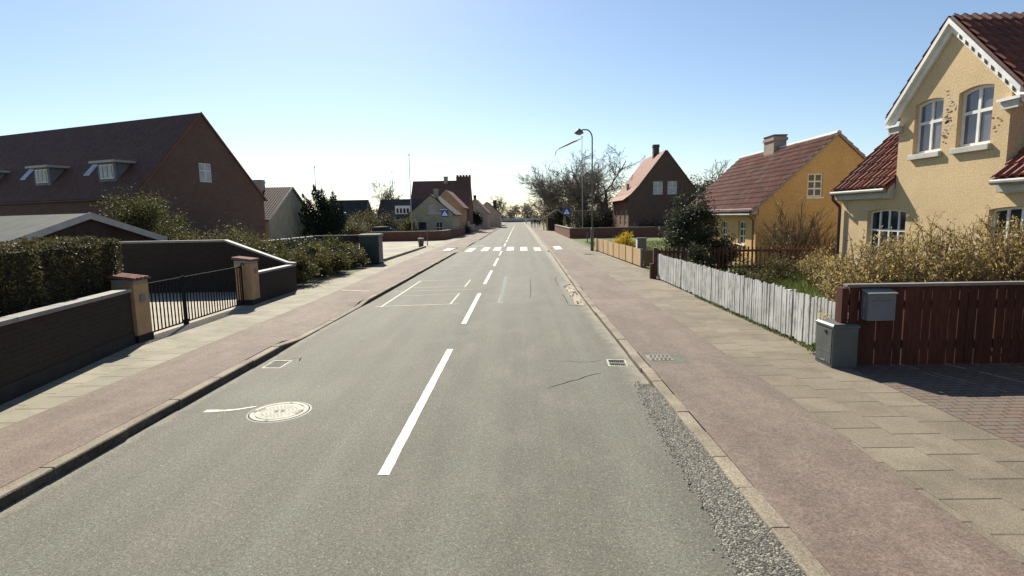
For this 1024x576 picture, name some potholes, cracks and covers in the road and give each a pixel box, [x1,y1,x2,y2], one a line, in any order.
manhole cover [246,402,312,423]
drain grate [262,360,293,368]
